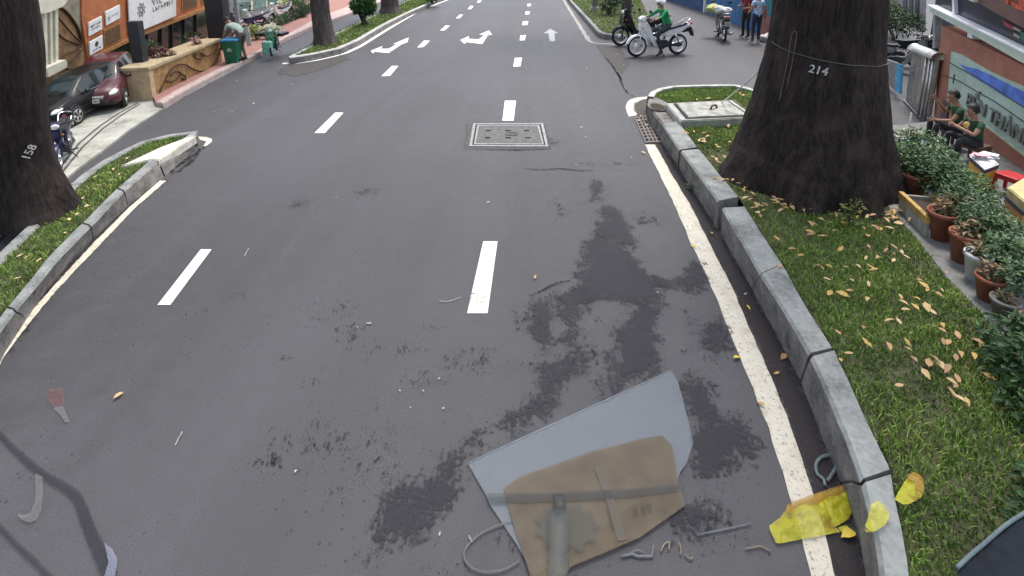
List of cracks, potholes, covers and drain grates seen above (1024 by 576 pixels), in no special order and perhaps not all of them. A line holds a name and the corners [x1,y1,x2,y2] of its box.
manhole cover [464,123,551,150]
drain grate [634,115,662,144]
utility cover [665,100,745,129]
